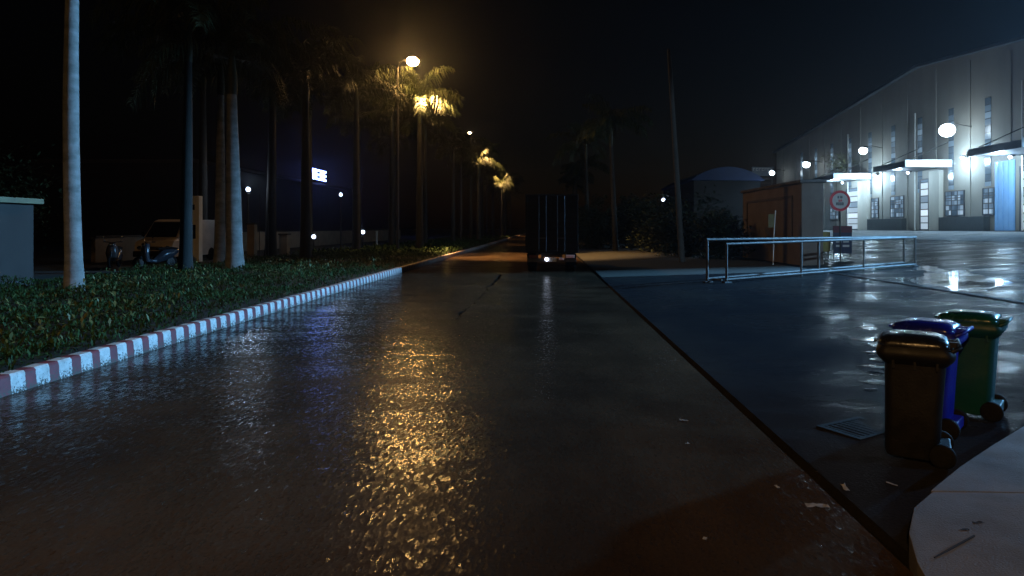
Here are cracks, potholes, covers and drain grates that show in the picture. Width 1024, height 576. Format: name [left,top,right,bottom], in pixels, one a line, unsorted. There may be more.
drain grate [816,416,885,441]
crack [457,275,502,319]
